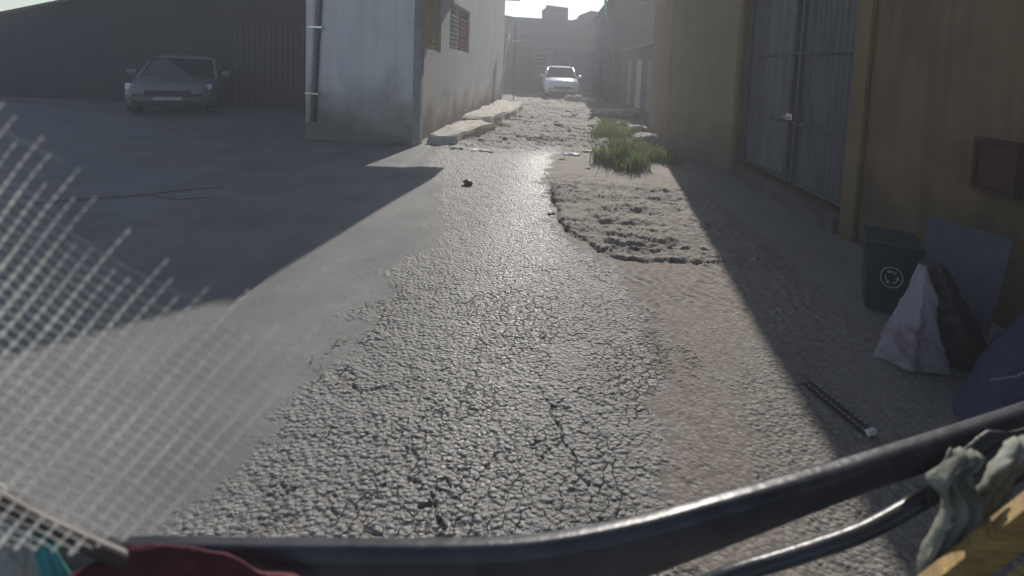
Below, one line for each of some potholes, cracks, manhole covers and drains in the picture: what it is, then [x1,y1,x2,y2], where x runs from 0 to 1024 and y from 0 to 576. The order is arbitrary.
crack [24,187,213,205]
crack [183,281,700,538]
